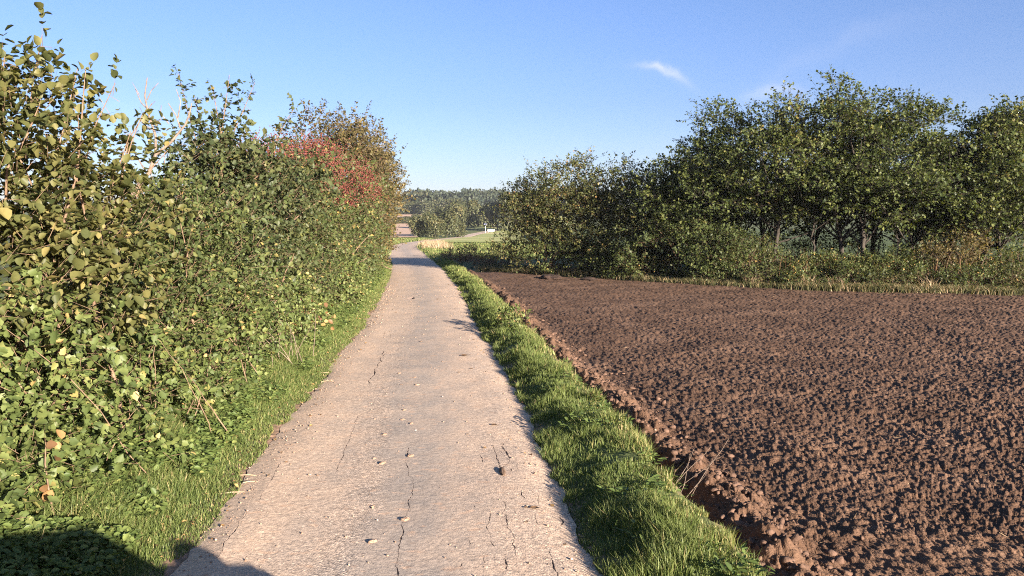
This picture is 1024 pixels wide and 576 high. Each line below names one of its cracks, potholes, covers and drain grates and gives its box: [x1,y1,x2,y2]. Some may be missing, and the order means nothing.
crack [479,444,518,472]
crack [469,491,539,569]
crack [395,447,414,576]
